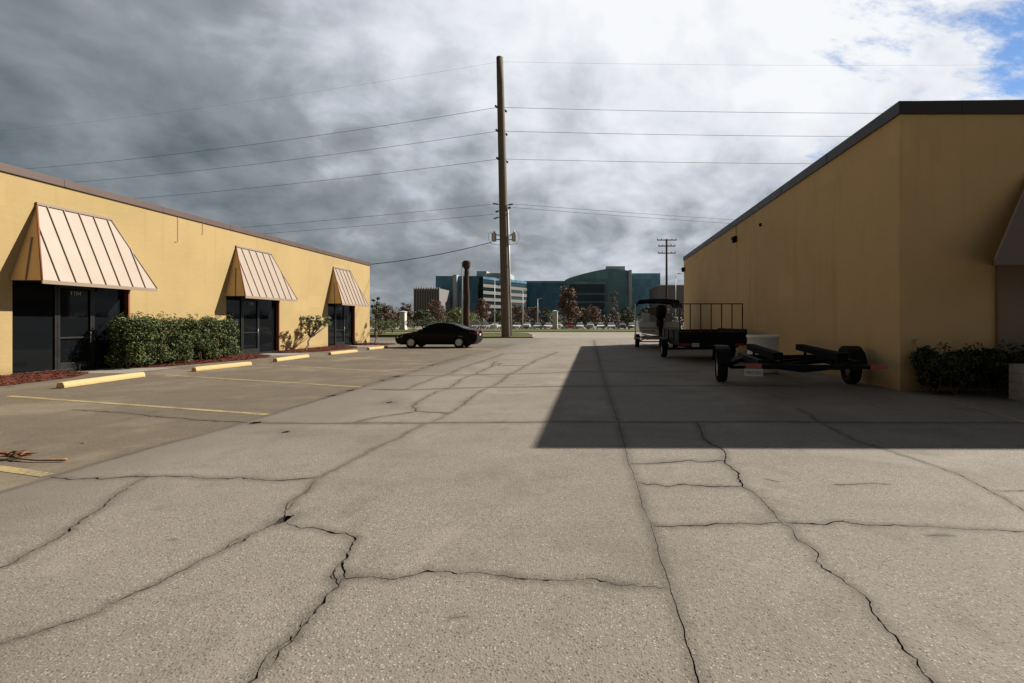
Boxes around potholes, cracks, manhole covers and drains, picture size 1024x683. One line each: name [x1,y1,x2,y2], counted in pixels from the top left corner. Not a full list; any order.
crack [799,409,1024,511]
crack [642,422,1018,683]
crack [0,352,660,683]
